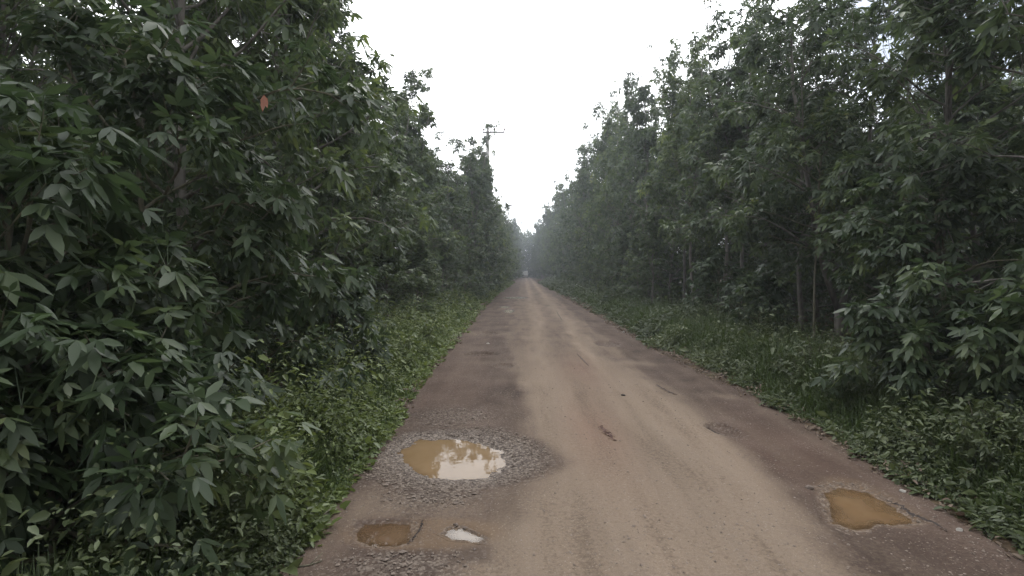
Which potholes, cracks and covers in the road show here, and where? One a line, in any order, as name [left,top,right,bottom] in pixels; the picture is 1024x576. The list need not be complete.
pothole [697,418,751,441]
pothole [361,422,557,498]
pothole [807,476,938,537]
pothole [434,523,493,546]
pothole [342,515,428,551]
crack [886,500,947,531]
